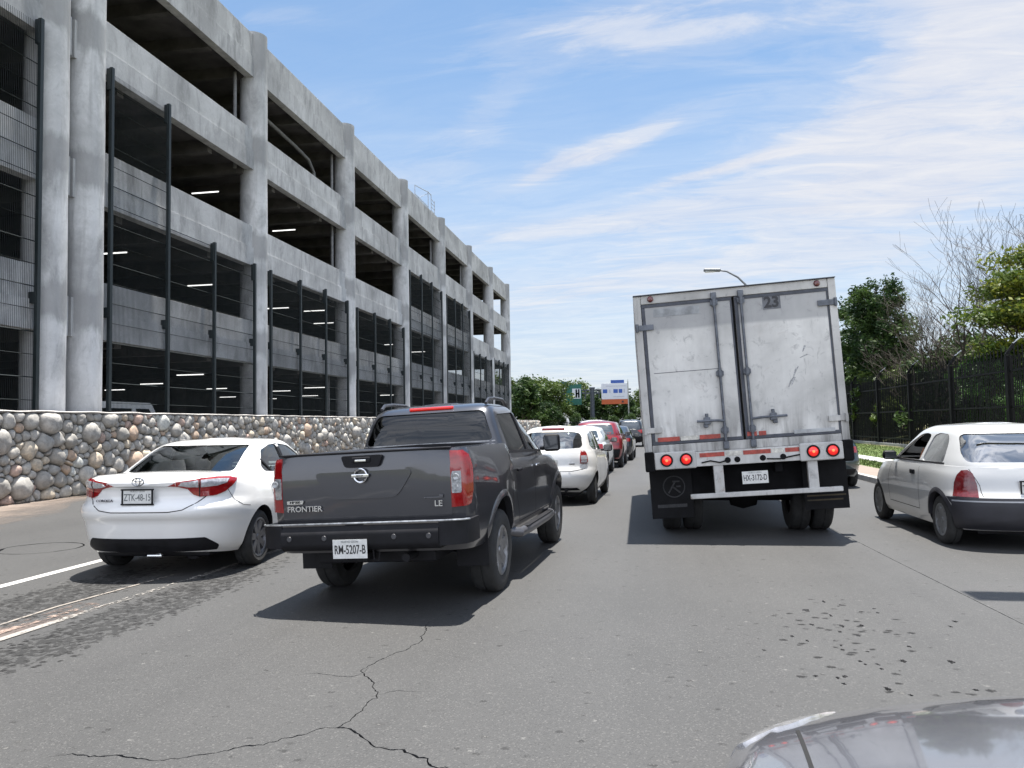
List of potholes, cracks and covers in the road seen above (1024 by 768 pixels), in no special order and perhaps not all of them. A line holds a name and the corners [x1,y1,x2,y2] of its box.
pothole [790,601,979,696]
crack [52,622,448,768]
manhole cover [0,542,85,554]
